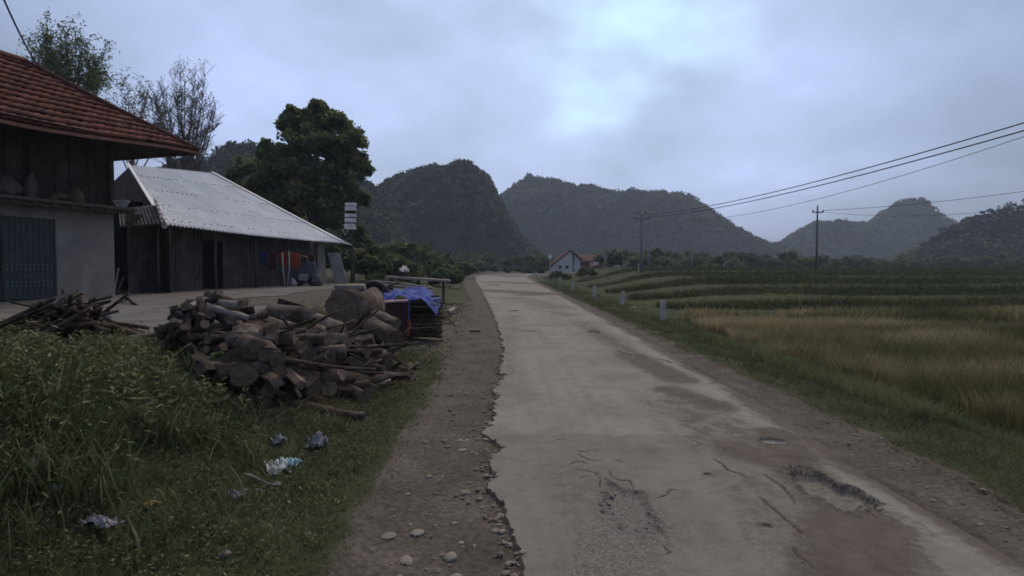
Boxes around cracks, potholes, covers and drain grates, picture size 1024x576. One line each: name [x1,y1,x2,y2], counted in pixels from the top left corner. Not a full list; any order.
pothole [754,437,793,445]
crack [690,440,817,573]
crack [557,439,679,500]
pothole [774,461,897,519]
